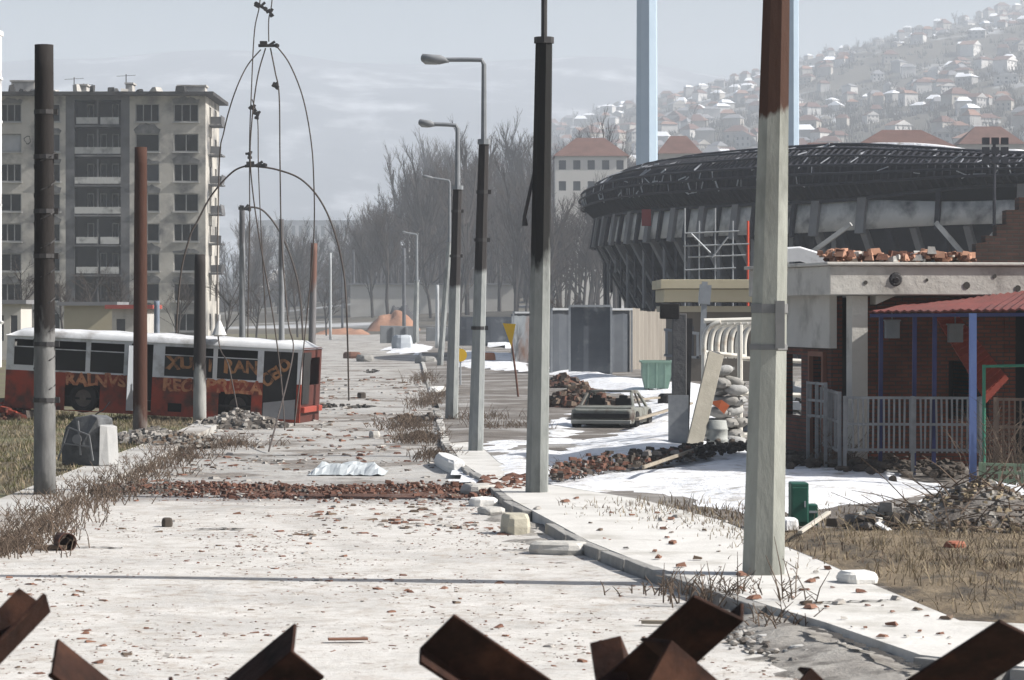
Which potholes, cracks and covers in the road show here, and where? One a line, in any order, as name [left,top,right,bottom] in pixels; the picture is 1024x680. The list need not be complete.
crack [804,625,921,668]
